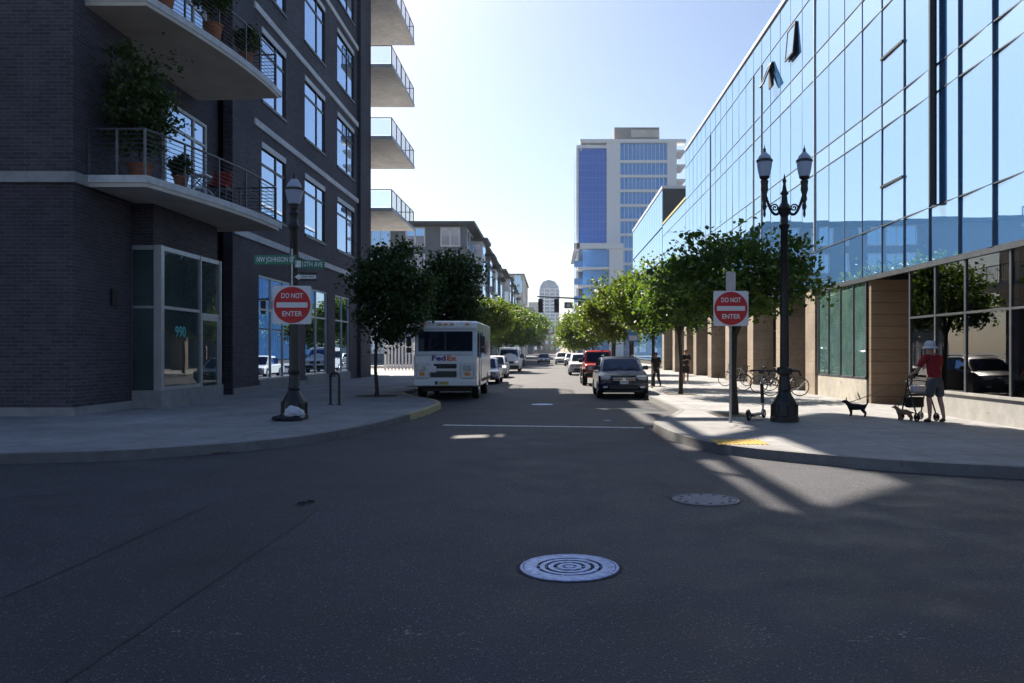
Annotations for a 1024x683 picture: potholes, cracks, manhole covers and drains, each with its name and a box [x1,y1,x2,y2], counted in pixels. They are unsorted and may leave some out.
manhole cover [669,493,742,506]
manhole cover [516,554,623,582]
